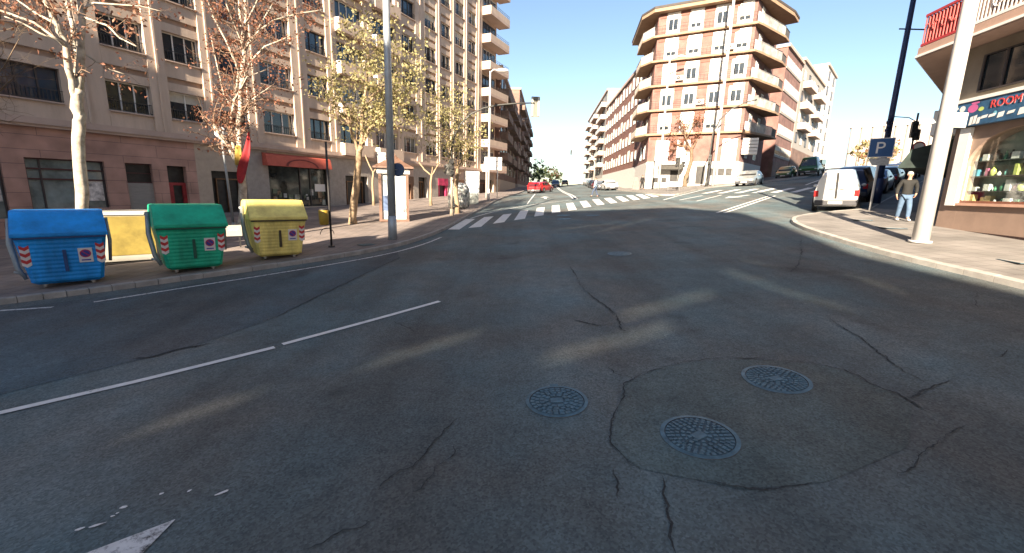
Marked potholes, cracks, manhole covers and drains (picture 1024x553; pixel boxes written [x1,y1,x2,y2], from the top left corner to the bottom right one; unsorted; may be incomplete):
crack [897,425,966,476]
crack [570,266,632,333]
crack [298,520,373,553]
manhole cover [526,384,588,418]
manhole cover [741,365,814,394]
crack [657,476,676,553]
manhole cover [660,415,742,460]
crack [608,318,951,500]
crack [379,421,456,498]
